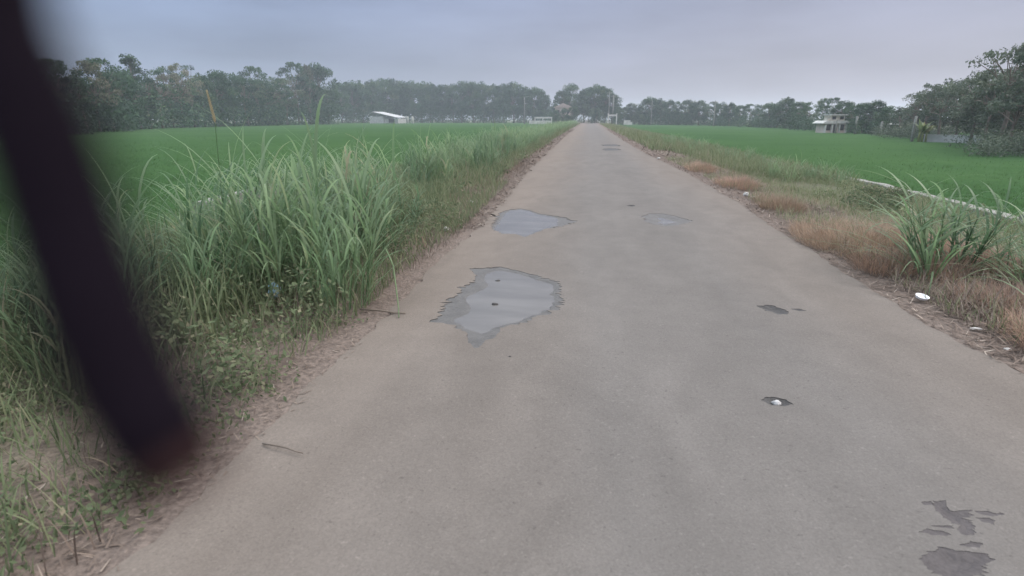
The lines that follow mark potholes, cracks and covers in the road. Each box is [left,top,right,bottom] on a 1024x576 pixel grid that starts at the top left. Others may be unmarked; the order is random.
pothole [762,397,792,406]
pothole [429,267,564,348]
pothole [757,305,788,314]
pothole [642,214,692,226]
pothole [491,209,576,237]
